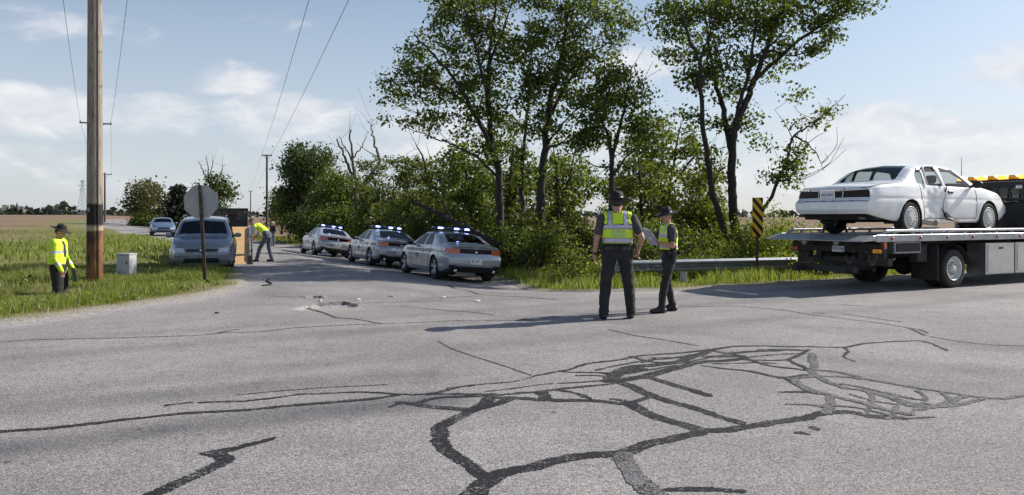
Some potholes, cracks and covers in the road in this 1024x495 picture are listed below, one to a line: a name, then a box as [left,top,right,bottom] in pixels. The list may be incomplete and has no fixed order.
pothole [293,301,358,311]
crack [0,285,1024,495]
